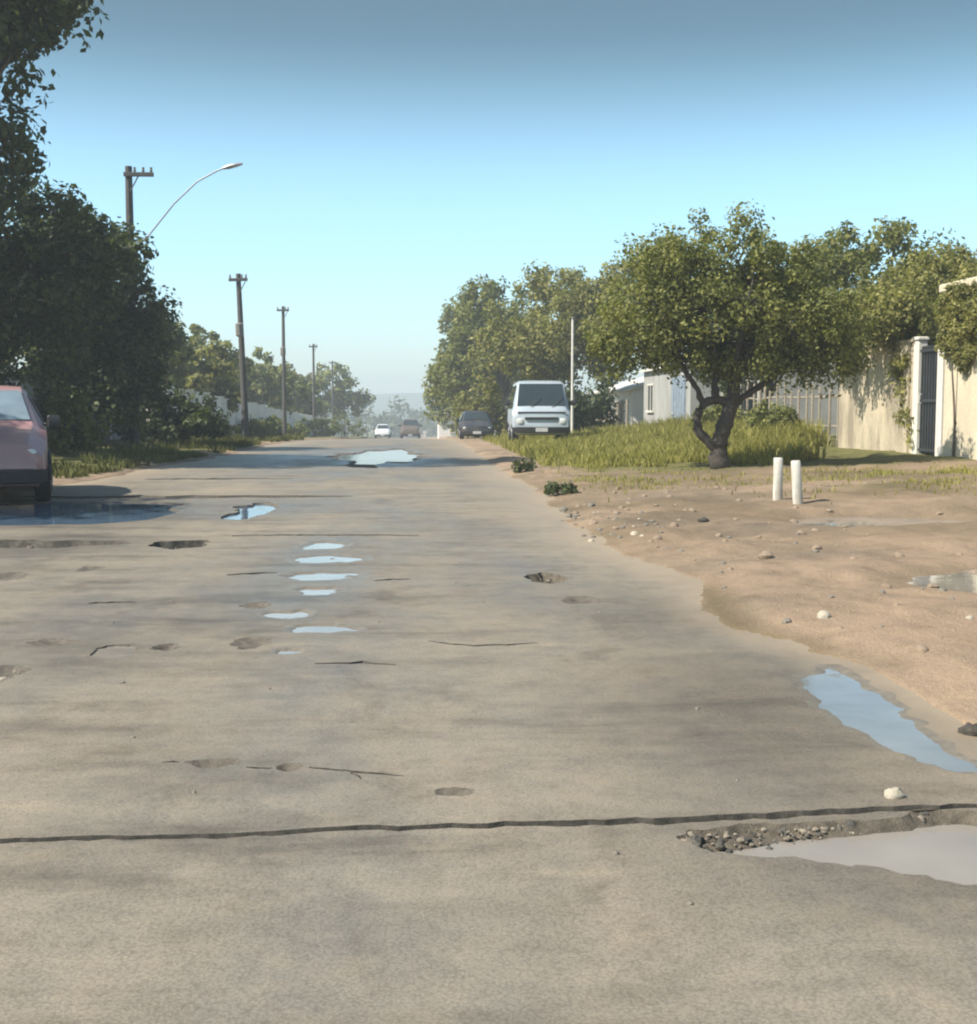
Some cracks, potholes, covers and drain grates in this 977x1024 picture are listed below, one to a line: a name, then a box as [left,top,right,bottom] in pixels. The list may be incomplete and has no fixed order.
pothole [221,502,280,520]
crack [161,761,403,779]
pothole [256,608,318,620]
pothole [230,636,273,650]
pothole [277,570,373,581]
pothole [524,572,567,584]
pothole [0,539,132,549]
pothole [281,622,368,633]
pothole [294,540,354,550]
pothole [284,553,374,563]
pothole [676,809,977,885]
pothole [290,586,347,596]
